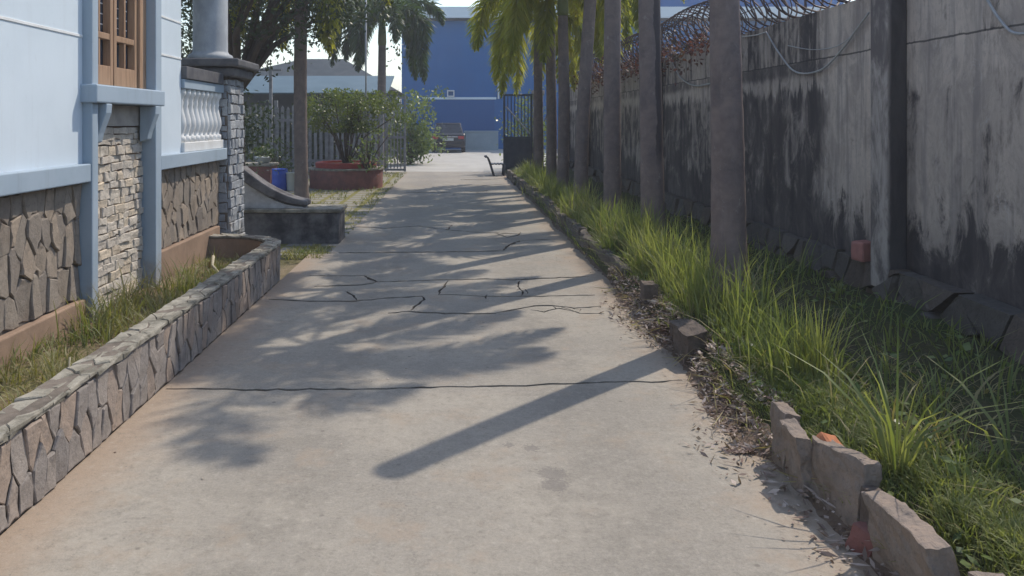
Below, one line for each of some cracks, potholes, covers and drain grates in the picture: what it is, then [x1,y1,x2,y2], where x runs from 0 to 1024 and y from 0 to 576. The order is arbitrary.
crack [324,276,591,315]
crack [367,226,520,253]
